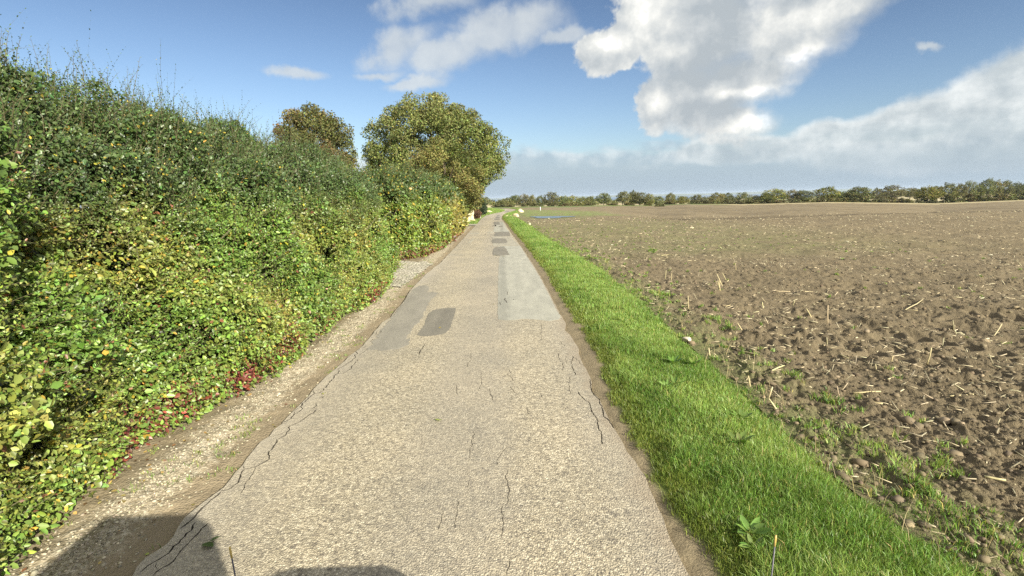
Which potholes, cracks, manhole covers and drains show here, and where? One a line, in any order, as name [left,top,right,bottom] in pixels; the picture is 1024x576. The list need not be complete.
crack [507,325,613,444]
crack [141,304,404,574]
crack [496,447,510,538]
